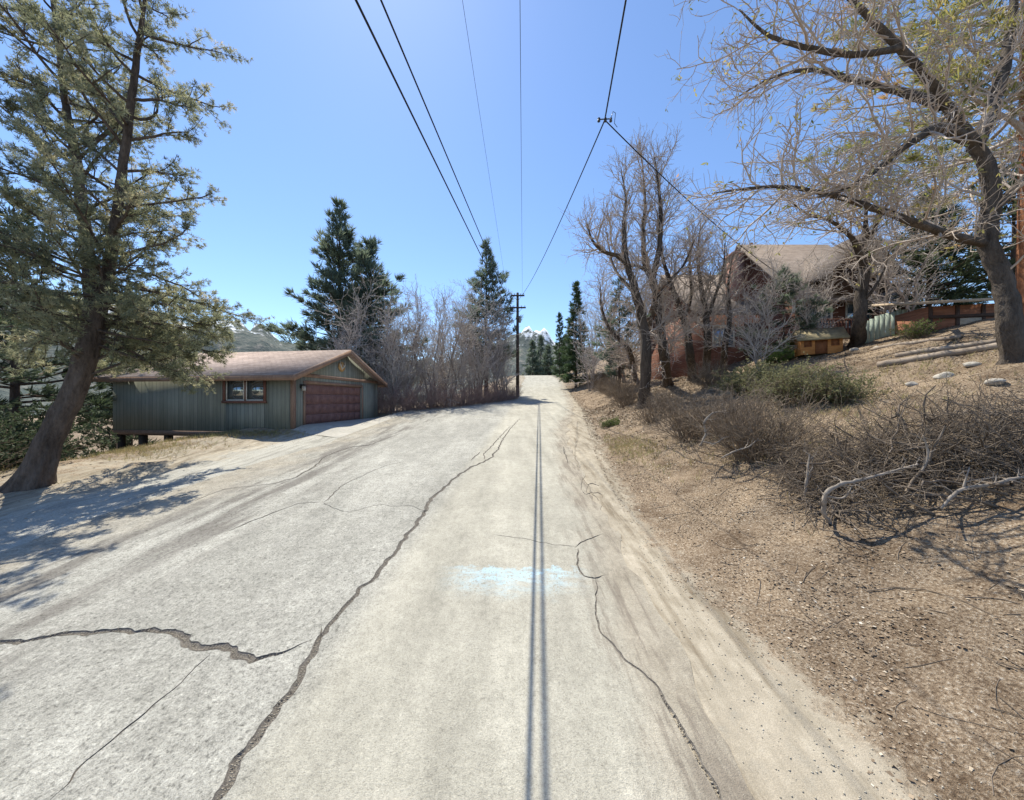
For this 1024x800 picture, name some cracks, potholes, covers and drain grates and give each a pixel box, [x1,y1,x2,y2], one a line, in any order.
crack [0,420,722,800]
